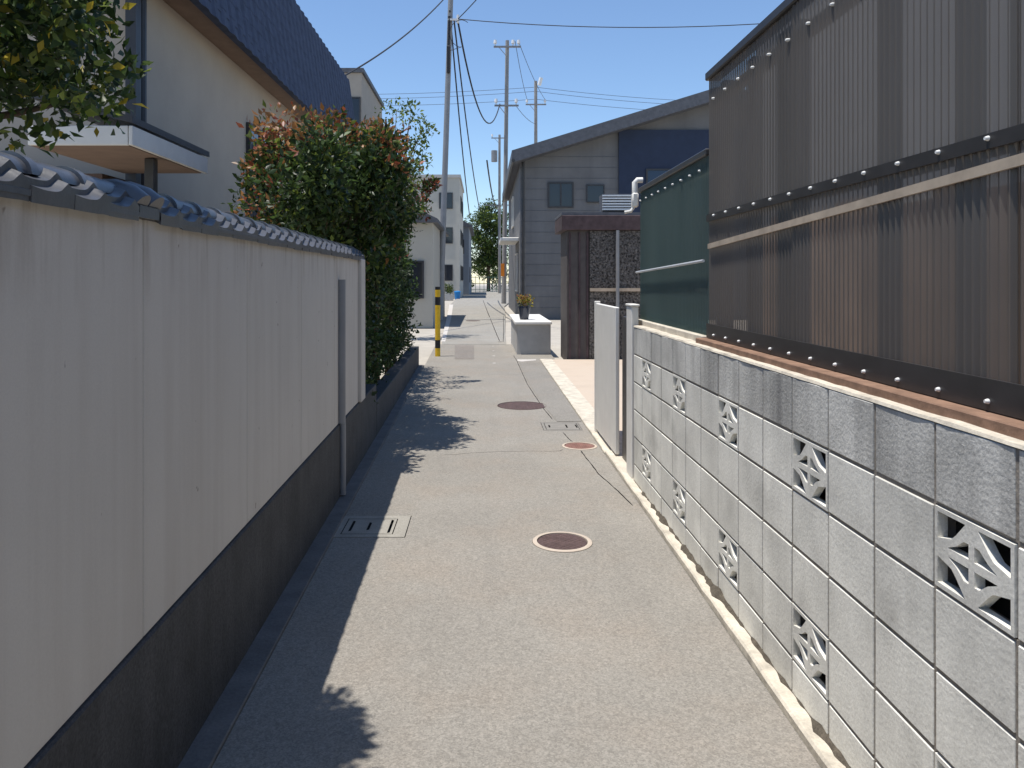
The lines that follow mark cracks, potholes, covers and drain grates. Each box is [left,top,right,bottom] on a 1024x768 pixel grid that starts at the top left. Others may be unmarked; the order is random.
manhole cover [562,442,597,450]
manhole cover [497,401,546,410]
manhole cover [533,531,592,553]
